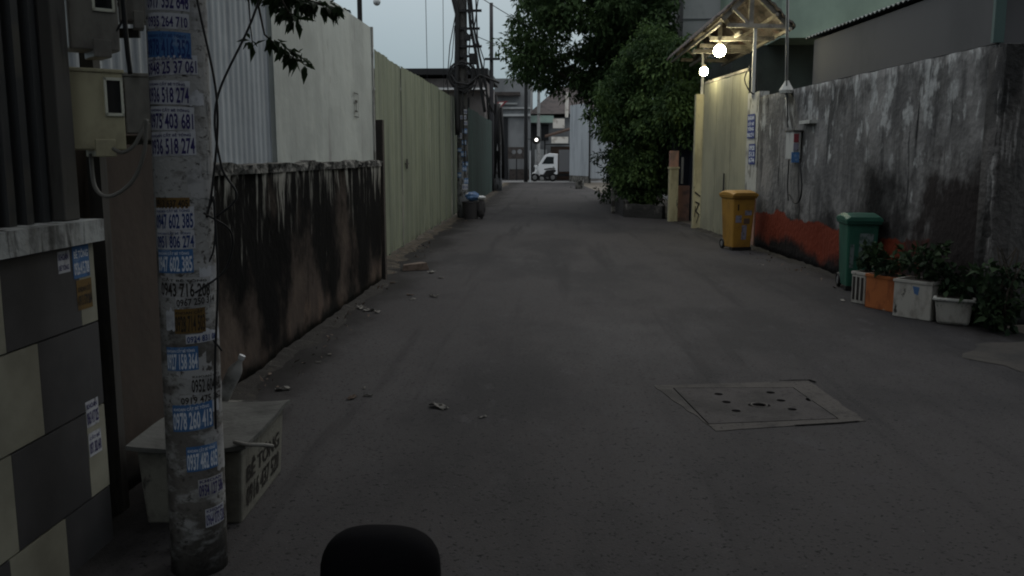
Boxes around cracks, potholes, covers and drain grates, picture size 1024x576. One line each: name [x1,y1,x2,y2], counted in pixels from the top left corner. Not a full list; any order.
manhole cover [654,379,866,431]
